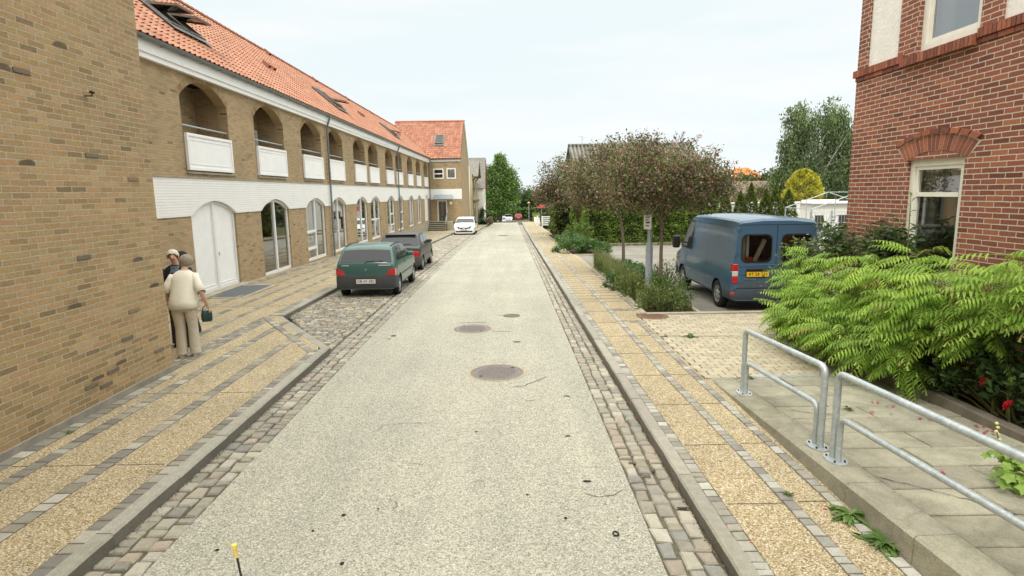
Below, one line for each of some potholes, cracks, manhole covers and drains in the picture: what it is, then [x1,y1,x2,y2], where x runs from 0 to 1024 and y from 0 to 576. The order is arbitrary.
manhole cover [468,364,526,381]
manhole cover [452,324,493,334]
